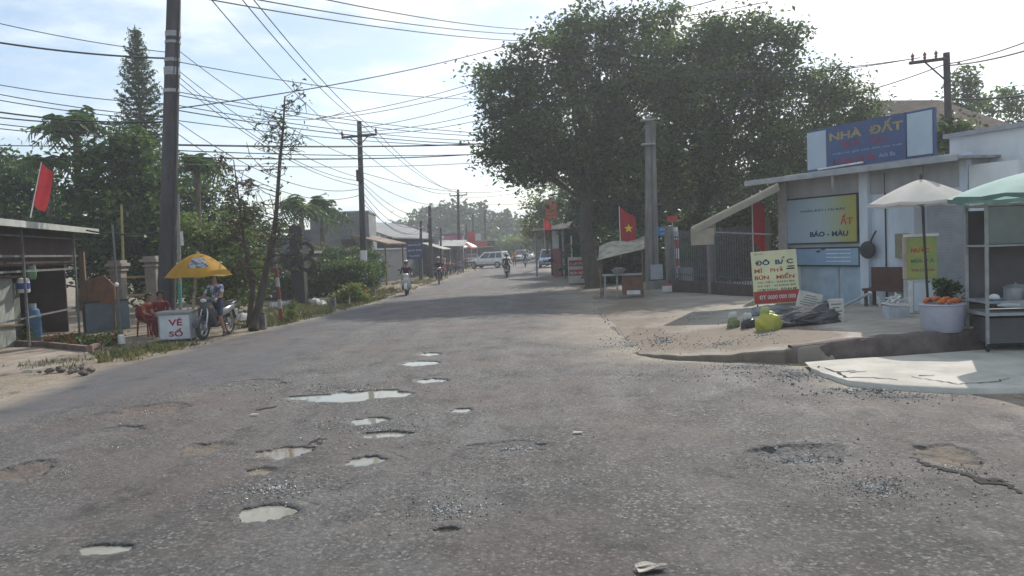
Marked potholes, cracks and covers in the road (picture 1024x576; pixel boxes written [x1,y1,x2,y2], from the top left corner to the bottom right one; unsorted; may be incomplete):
pothole [442,436,571,460]
pothole [404,376,463,385]
pothole [328,452,405,472]
pothole [53,537,156,564]
pothole [388,359,453,368]
pothole [0,455,76,487]
pothole [234,442,332,464]
pothole [229,463,294,480]
pothole [726,440,863,470]
pothole [436,405,487,416]
pothole [162,438,253,459]
pothole [334,414,406,429]
